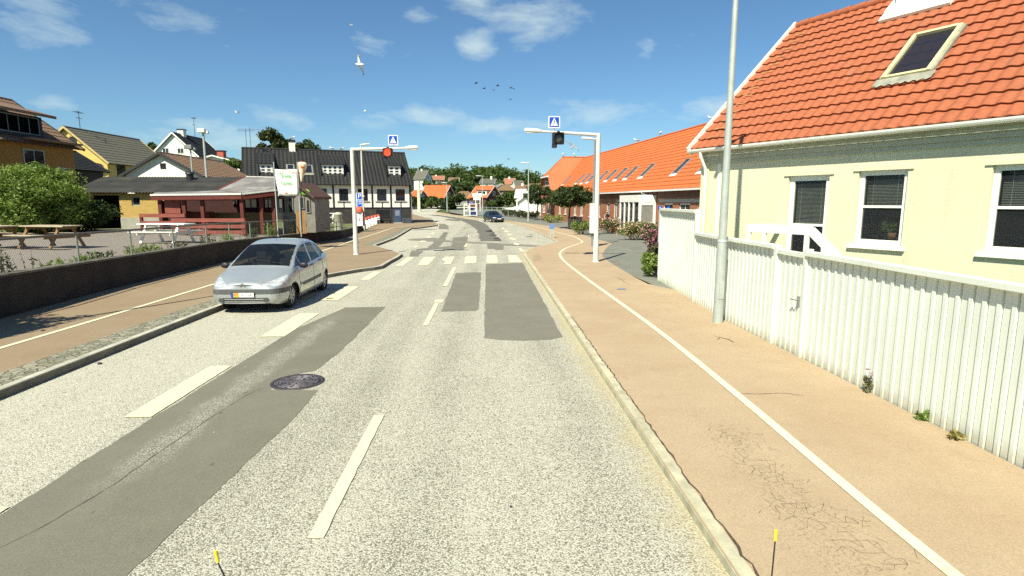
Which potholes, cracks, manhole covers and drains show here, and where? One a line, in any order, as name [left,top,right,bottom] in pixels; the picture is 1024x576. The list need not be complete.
manhole cover [270,374,325,390]
crack [571,316,917,576]
